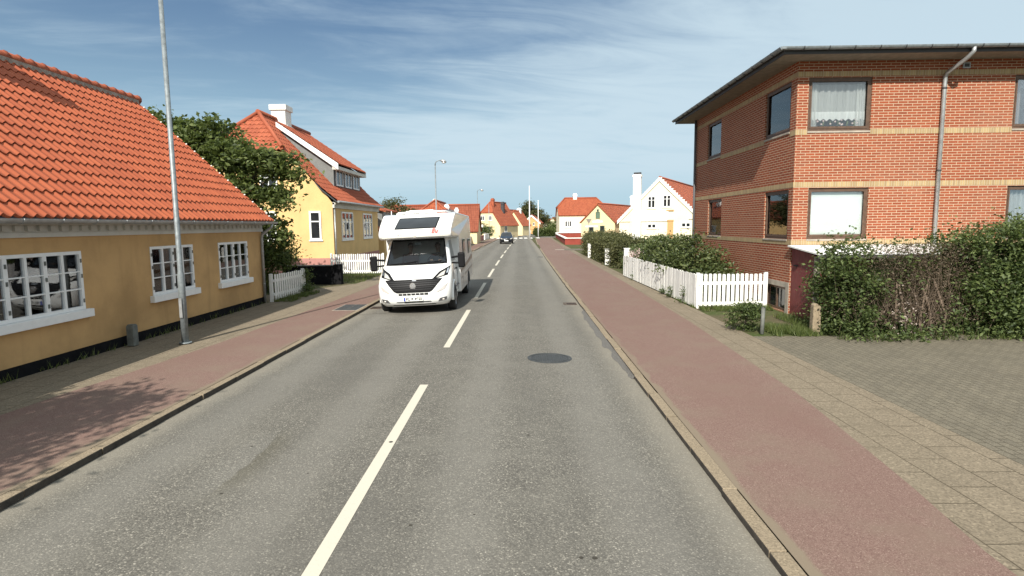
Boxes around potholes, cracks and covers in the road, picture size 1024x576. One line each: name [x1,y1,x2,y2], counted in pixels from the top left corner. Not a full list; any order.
manhole cover [527,353,572,363]
